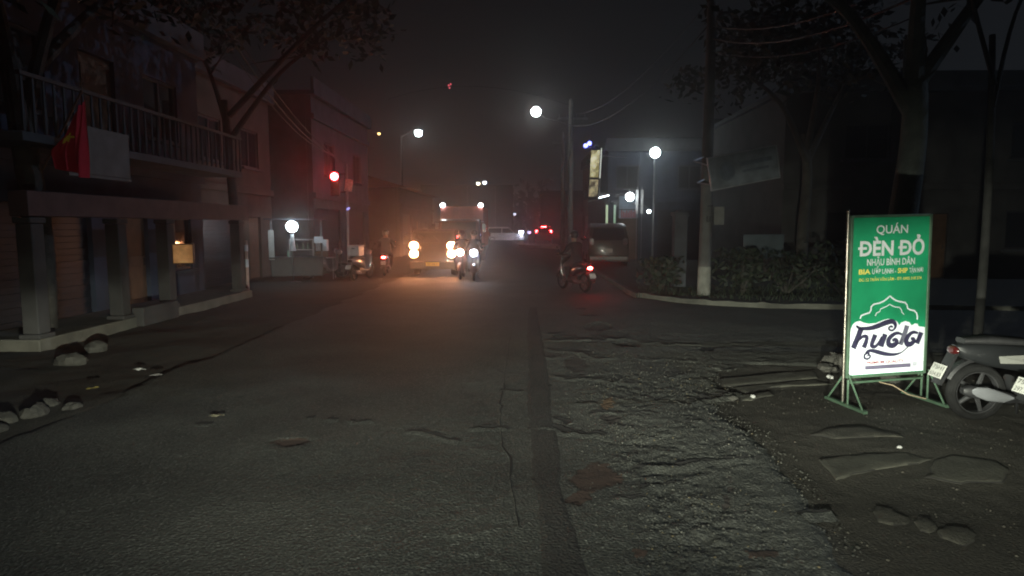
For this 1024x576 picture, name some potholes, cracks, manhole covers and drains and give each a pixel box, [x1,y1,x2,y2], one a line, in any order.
crack [609,449,769,506]
crack [404,424,510,445]
crack [543,308,743,426]
pothole [269,438,309,447]
crack [306,415,374,425]
